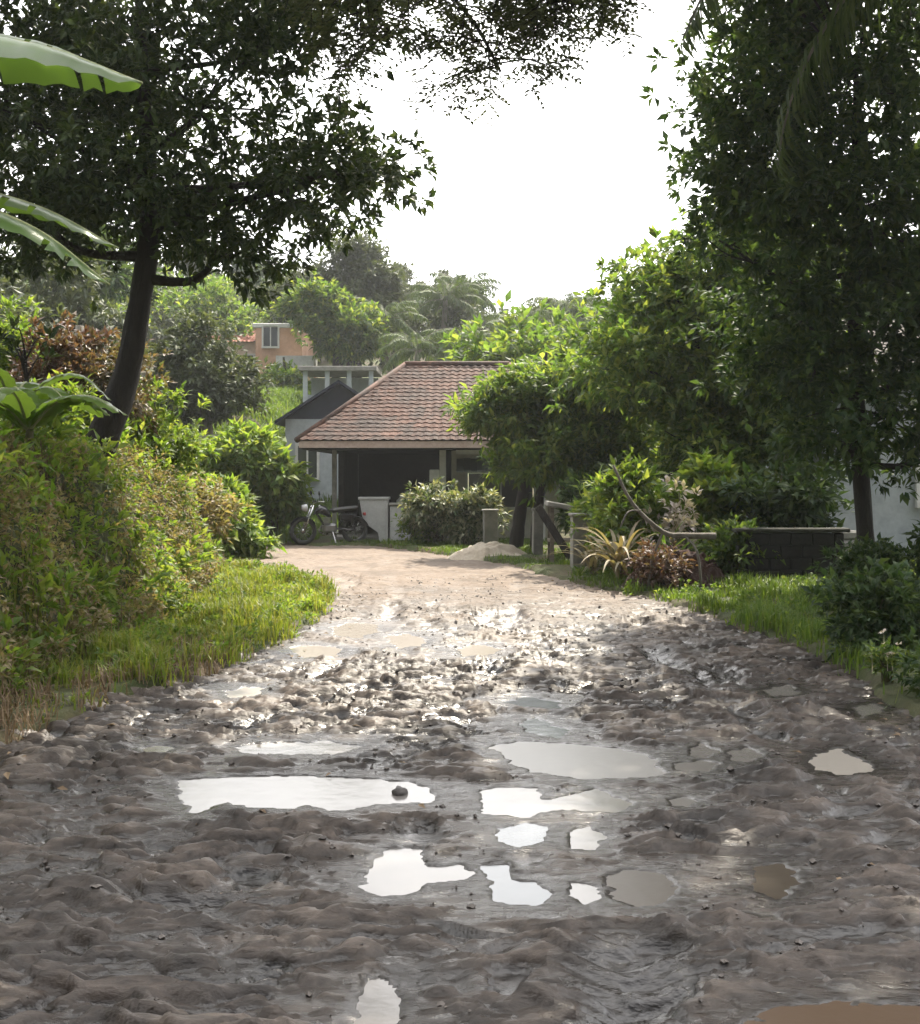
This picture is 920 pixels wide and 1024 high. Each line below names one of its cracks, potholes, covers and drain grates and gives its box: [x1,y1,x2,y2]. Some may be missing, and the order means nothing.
pothole [592,863,694,912]
pothole [474,736,682,783]
pothole [793,742,892,778]
pothole [554,875,612,910]
pothole [343,841,478,903]
pothole [470,857,563,912]
pothole [732,857,821,903]
pothole [221,737,376,758]
pothole [460,782,647,819]
pothole [552,819,621,854]
pothole [329,968,423,1024]
